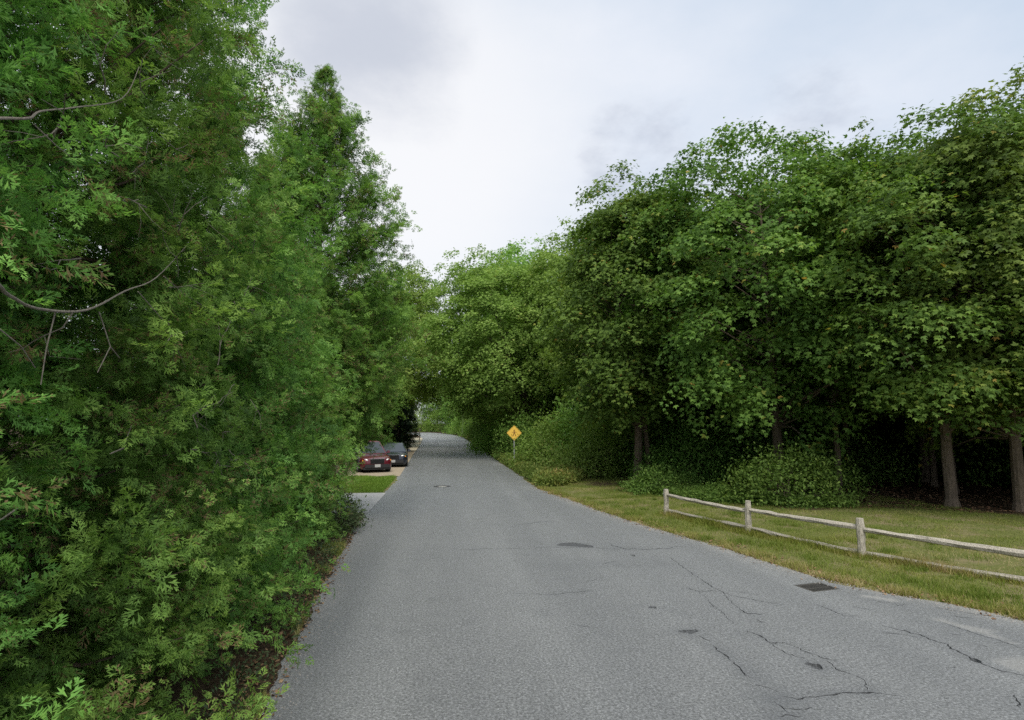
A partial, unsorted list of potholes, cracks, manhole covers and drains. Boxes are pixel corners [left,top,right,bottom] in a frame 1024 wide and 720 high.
crack [700,631,898,717]
drain grate [794,583,838,592]
crack [816,600,1021,675]
crack [468,545,781,623]
